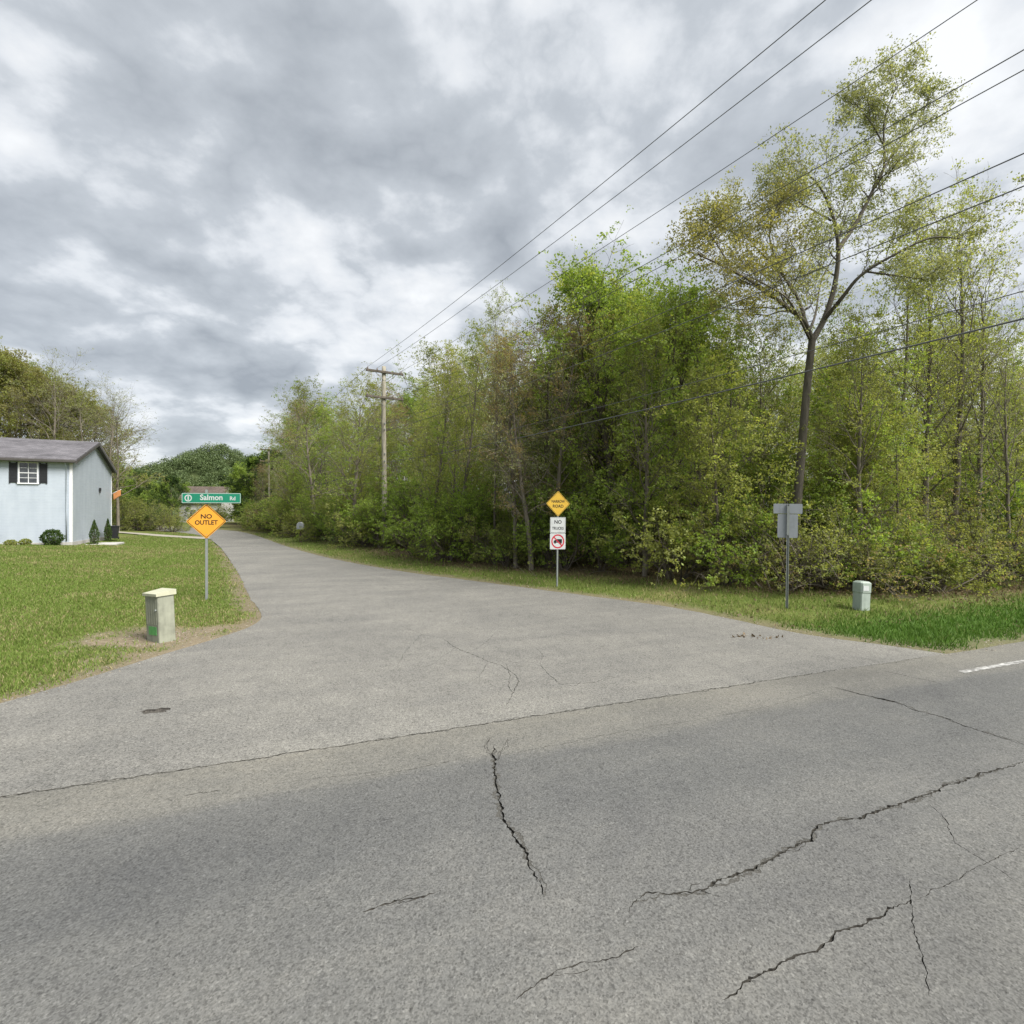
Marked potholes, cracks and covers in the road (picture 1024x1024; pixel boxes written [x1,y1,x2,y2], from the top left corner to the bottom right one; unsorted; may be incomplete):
crack [484,690,822,897]
crack [629,762,1023,1000]
crack [363,890,441,912]
crack [516,946,638,1000]
crack [398,626,519,705]
